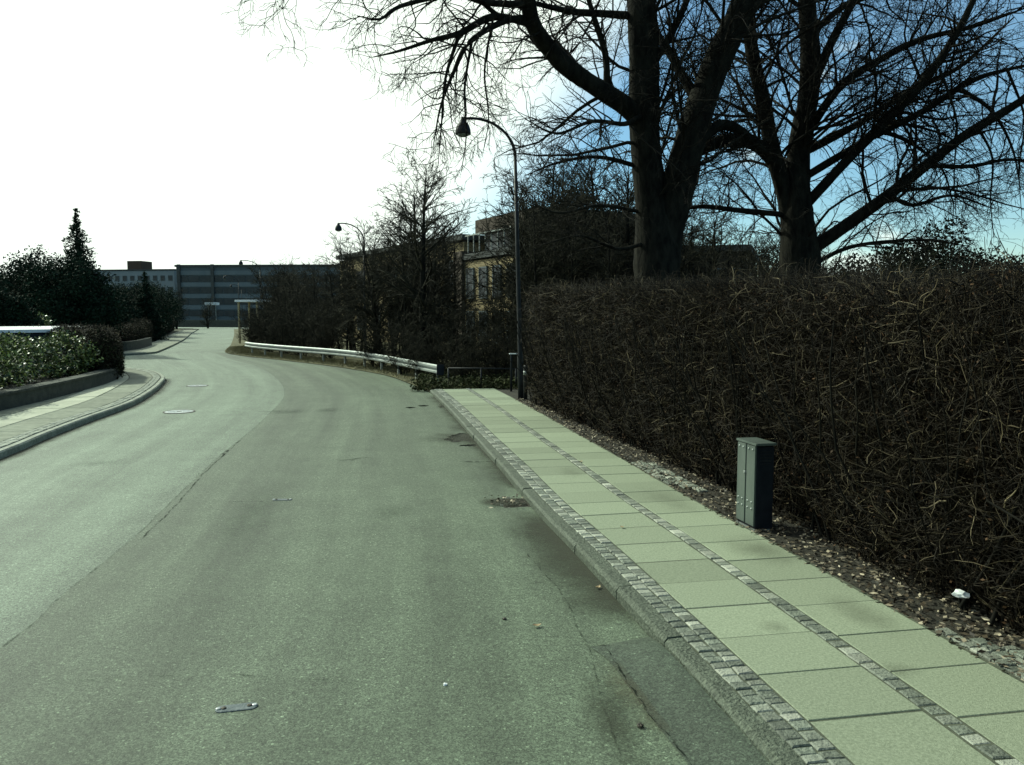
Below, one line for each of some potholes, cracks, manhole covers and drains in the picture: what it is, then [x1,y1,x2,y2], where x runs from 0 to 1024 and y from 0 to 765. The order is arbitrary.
pothole [444,433,471,442]
crack [595,644,692,765]
